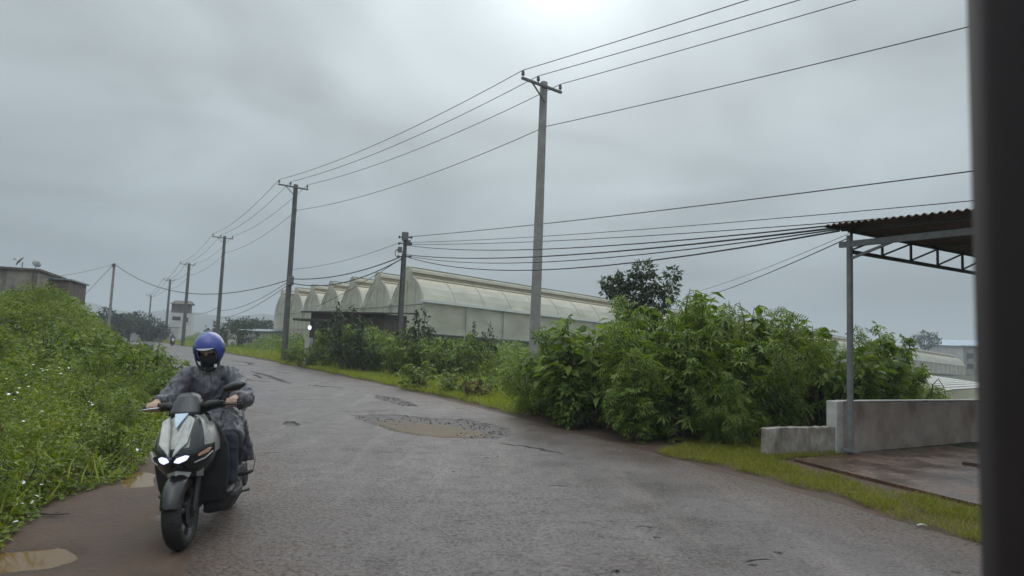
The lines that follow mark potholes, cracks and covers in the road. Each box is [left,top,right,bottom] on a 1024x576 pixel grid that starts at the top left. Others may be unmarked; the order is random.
crack [239,361,291,384]
pothole [352,414,513,440]
pothole [375,395,418,406]
crack [502,443,562,454]
